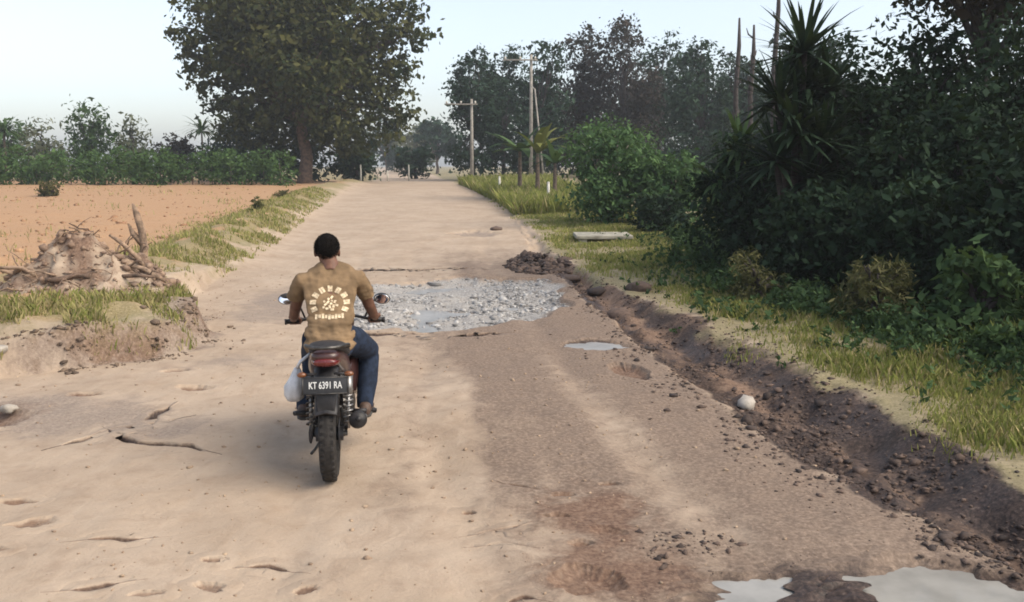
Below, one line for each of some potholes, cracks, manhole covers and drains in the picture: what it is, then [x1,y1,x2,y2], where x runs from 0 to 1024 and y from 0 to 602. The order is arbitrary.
pothole [530,556,646,602]
pothole [664,562,878,602]
crack [41,401,232,458]
pothole [548,335,645,353]
pothole [299,273,587,337]
pothole [596,359,664,384]
pothole [777,545,1024,602]
